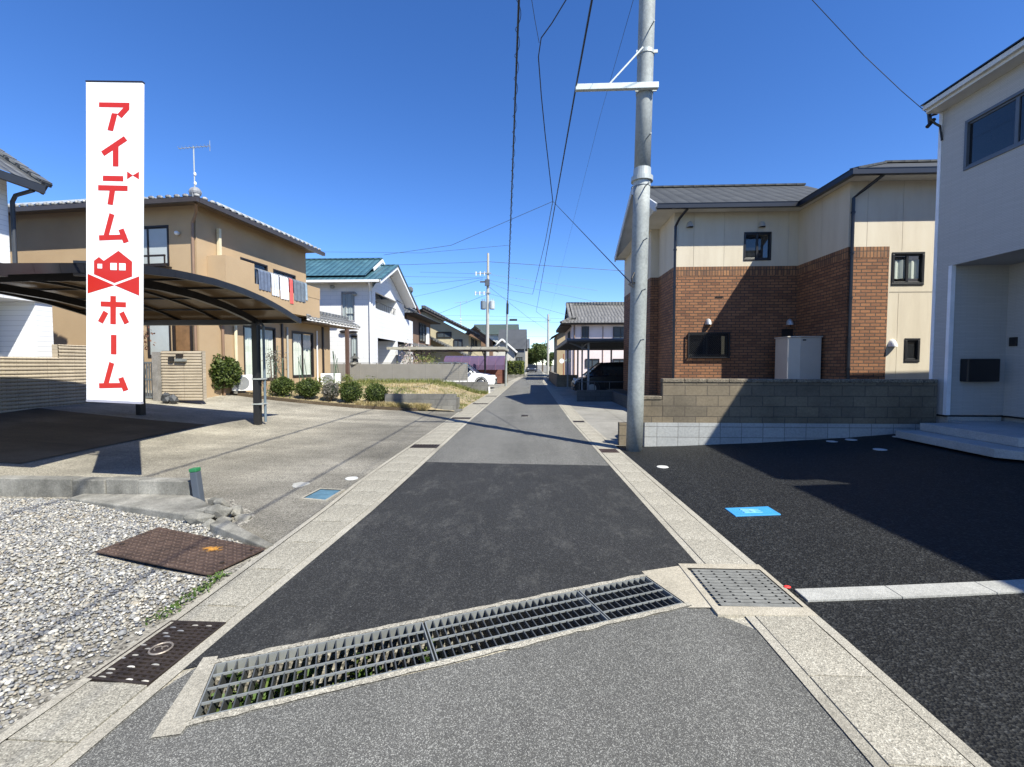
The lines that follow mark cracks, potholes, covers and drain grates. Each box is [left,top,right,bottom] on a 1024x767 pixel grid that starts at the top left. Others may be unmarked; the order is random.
drain grate [193,622,435,719]
drain grate [425,590,609,662]
drain grate [678,563,818,625]
drain grate [579,577,683,620]
